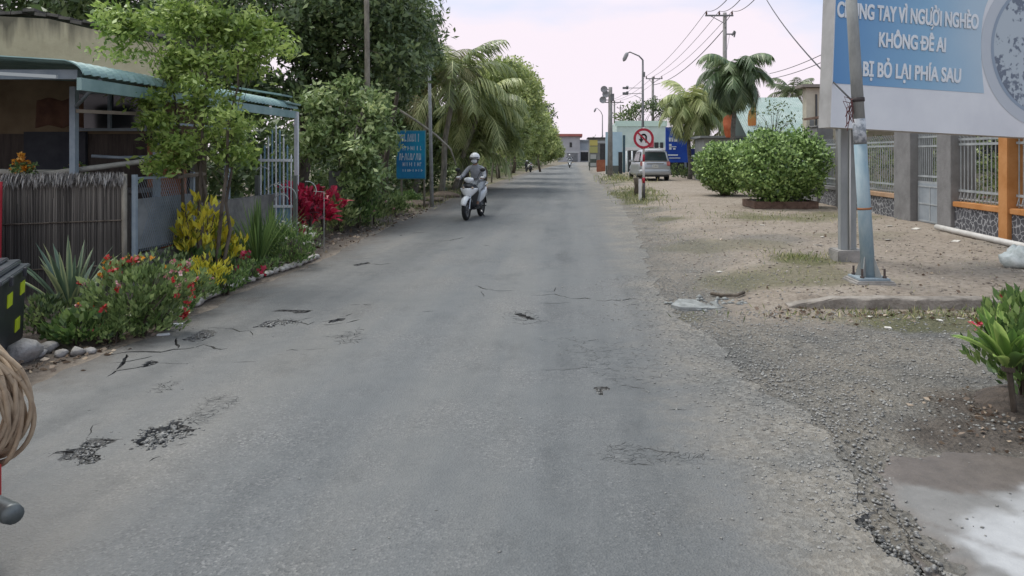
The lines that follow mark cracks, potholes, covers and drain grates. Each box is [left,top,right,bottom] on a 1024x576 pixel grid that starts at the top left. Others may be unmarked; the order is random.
pothole [124,417,205,451]
pothole [250,318,303,329]
pothole [182,329,217,342]
crack [503,288,636,326]
crack [108,304,366,393]
pothole [44,432,124,465]
